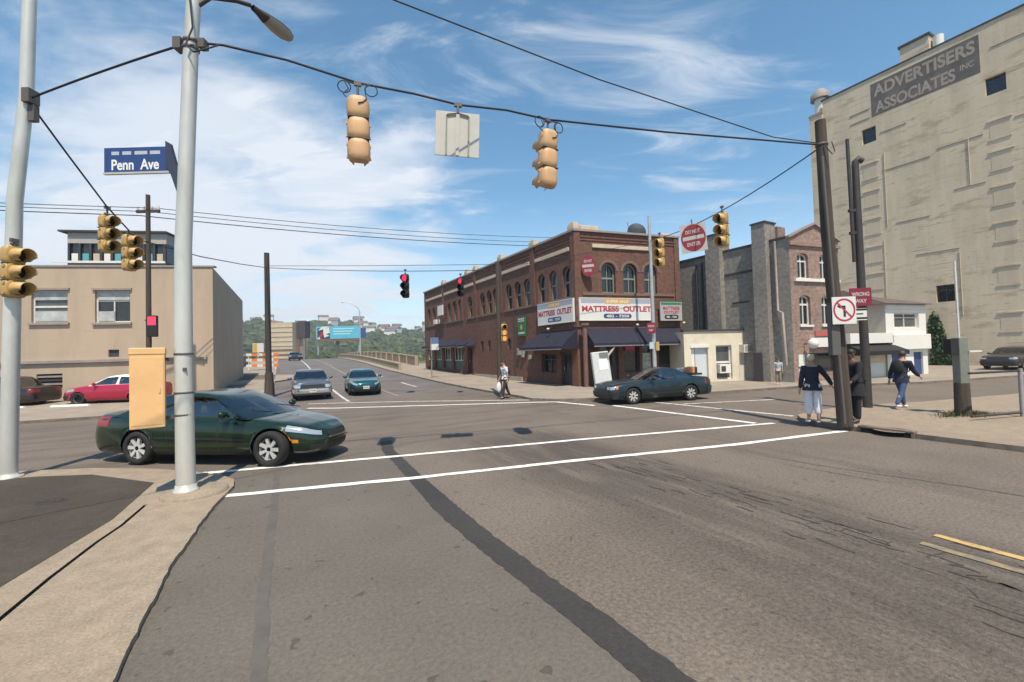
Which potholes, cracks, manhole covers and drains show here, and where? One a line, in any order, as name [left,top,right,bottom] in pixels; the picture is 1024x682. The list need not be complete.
drain grate [858,424,918,439]
